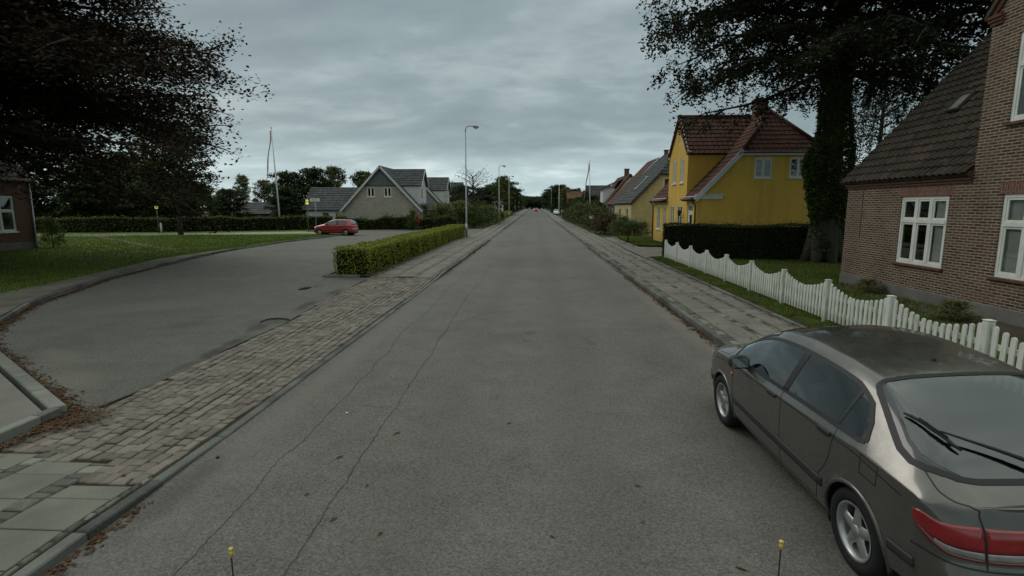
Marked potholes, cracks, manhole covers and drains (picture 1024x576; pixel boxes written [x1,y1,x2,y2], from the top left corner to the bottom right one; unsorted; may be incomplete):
crack [173,259,537,576]
